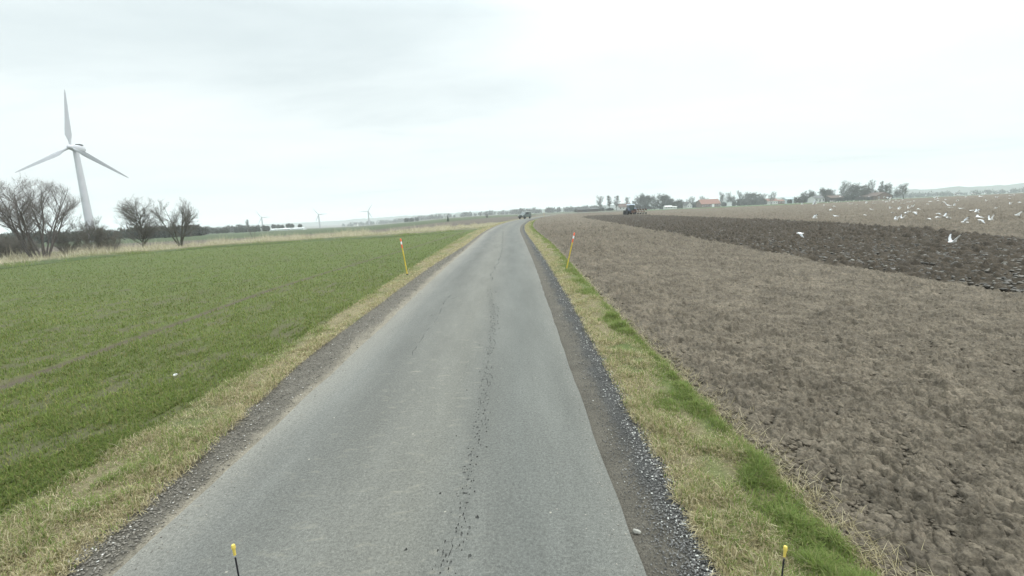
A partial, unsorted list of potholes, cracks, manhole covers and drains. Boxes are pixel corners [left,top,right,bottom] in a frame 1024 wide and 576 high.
crack [432,234,504,574]
